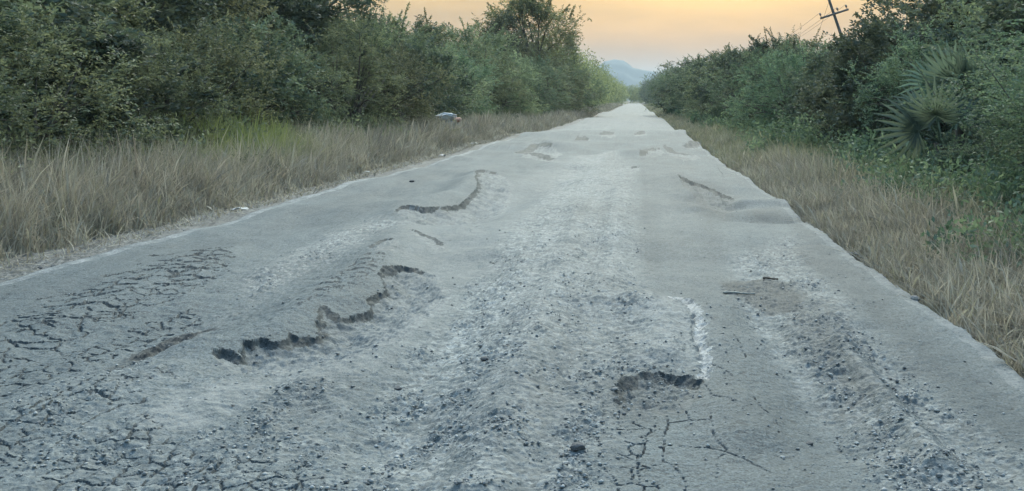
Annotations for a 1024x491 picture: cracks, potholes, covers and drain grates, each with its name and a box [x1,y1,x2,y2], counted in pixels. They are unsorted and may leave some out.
pothole [211,265,452,377]
crack [0,247,236,397]
pothole [514,142,563,158]
pothole [612,371,705,419]
pothole [521,153,562,162]
pothole [677,174,736,219]
pothole [396,170,515,226]
pothole [682,141,701,149]
crack [0,351,337,491]
pothole [130,327,222,361]
crack [612,390,767,491]
